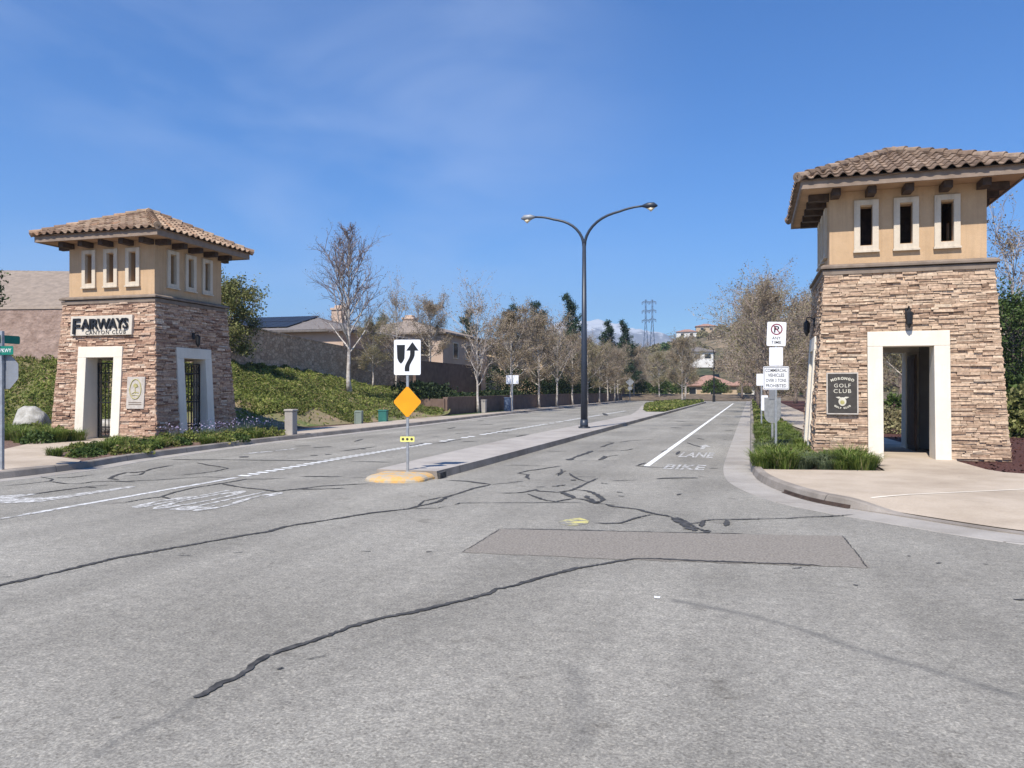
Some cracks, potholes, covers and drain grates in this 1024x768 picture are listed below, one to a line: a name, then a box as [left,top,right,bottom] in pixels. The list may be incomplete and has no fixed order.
crack [515,421,701,504]
